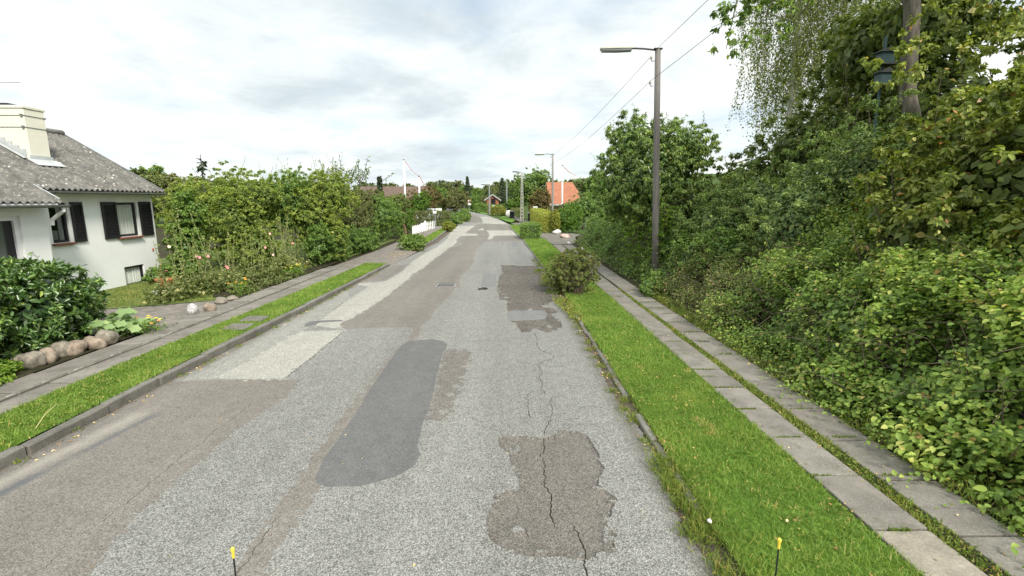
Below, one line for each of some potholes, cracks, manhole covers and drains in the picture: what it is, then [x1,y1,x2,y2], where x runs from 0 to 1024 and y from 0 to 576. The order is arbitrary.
crack [516,333,588,576]
